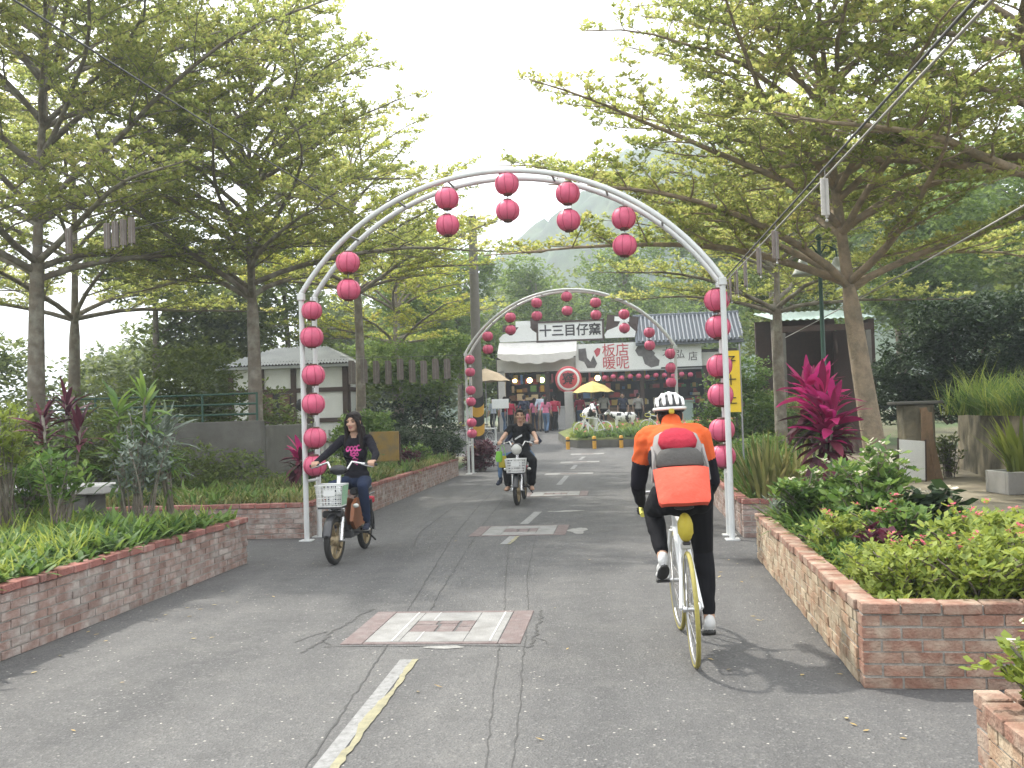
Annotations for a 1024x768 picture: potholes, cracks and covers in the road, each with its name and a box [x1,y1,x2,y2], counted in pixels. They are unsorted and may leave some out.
crack [296,609,547,653]
